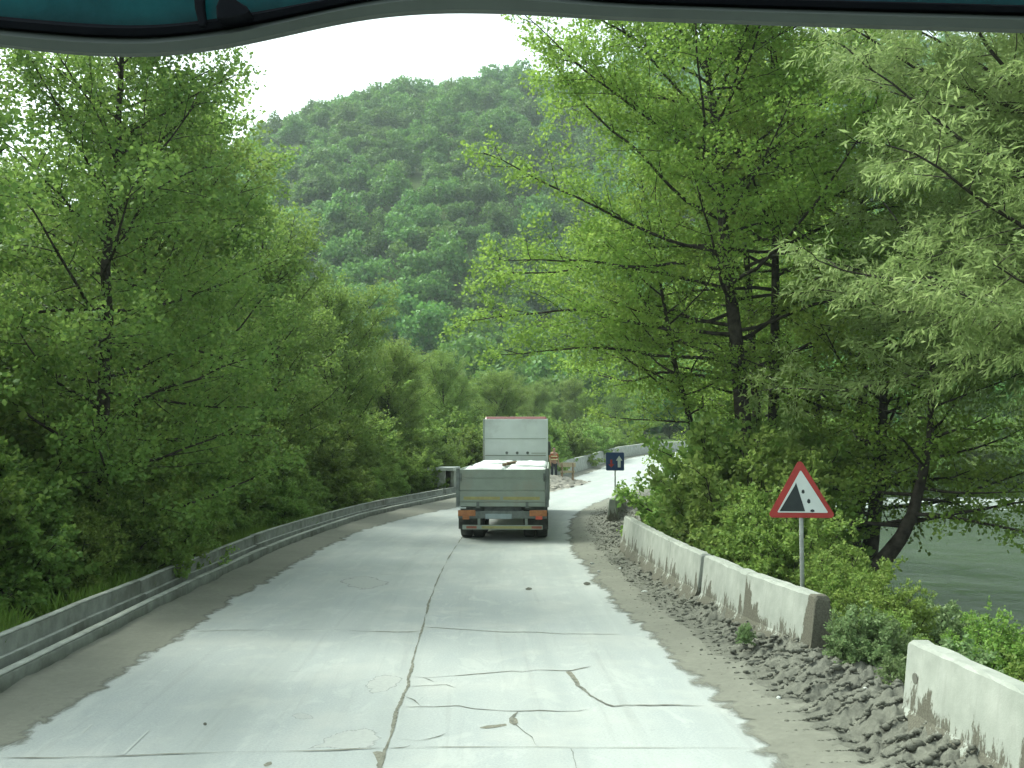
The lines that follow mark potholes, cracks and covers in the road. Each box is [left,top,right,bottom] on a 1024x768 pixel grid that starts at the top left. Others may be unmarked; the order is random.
crack [408,666,701,743]
